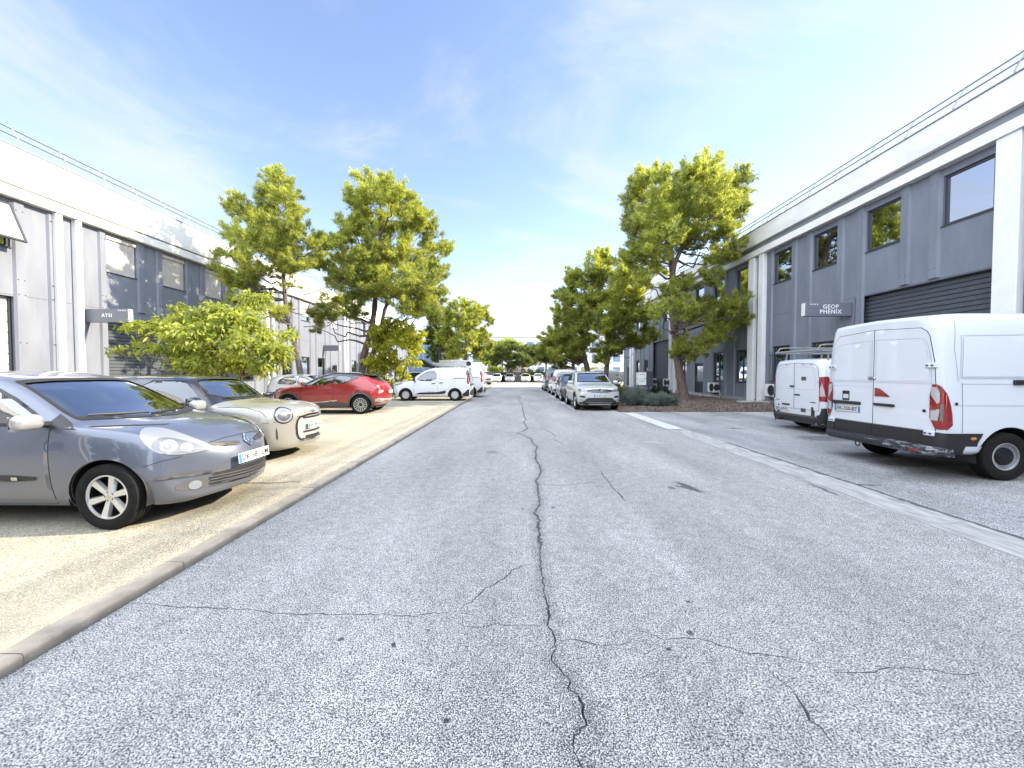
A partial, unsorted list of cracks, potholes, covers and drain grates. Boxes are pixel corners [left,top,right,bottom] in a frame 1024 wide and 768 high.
crack [625,630,991,746]
crack [130,397,631,768]
